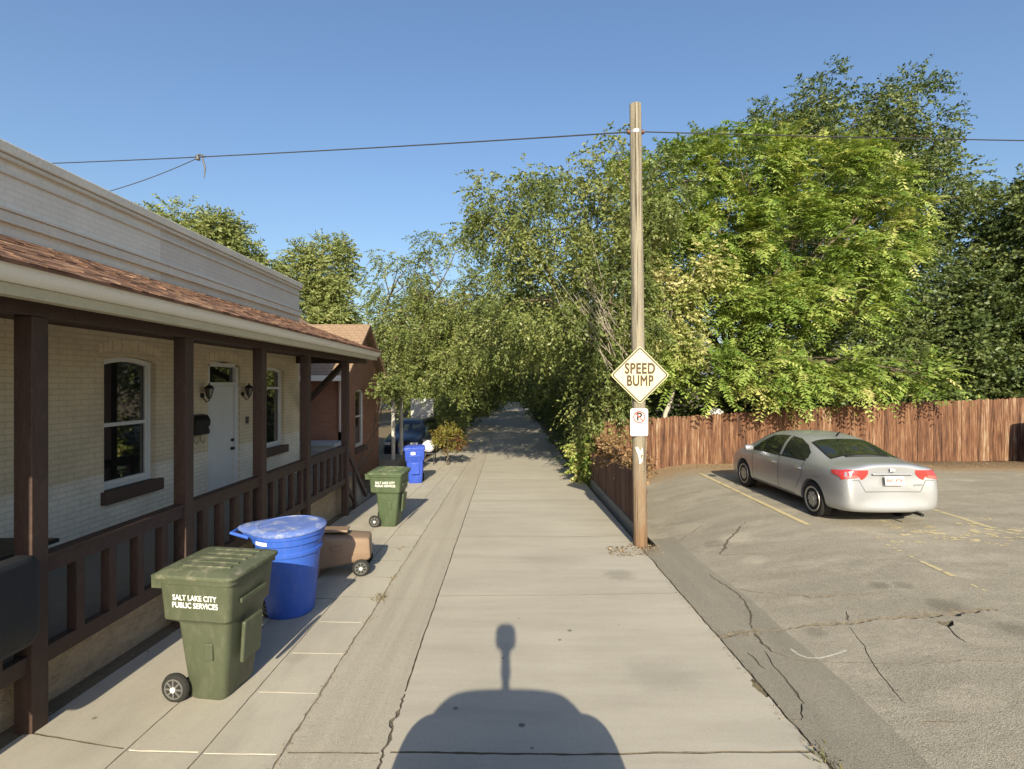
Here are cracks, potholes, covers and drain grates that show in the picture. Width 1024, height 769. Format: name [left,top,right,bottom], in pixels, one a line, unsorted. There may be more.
crack [709,522,1024,720]
crack [377,694,406,769]
